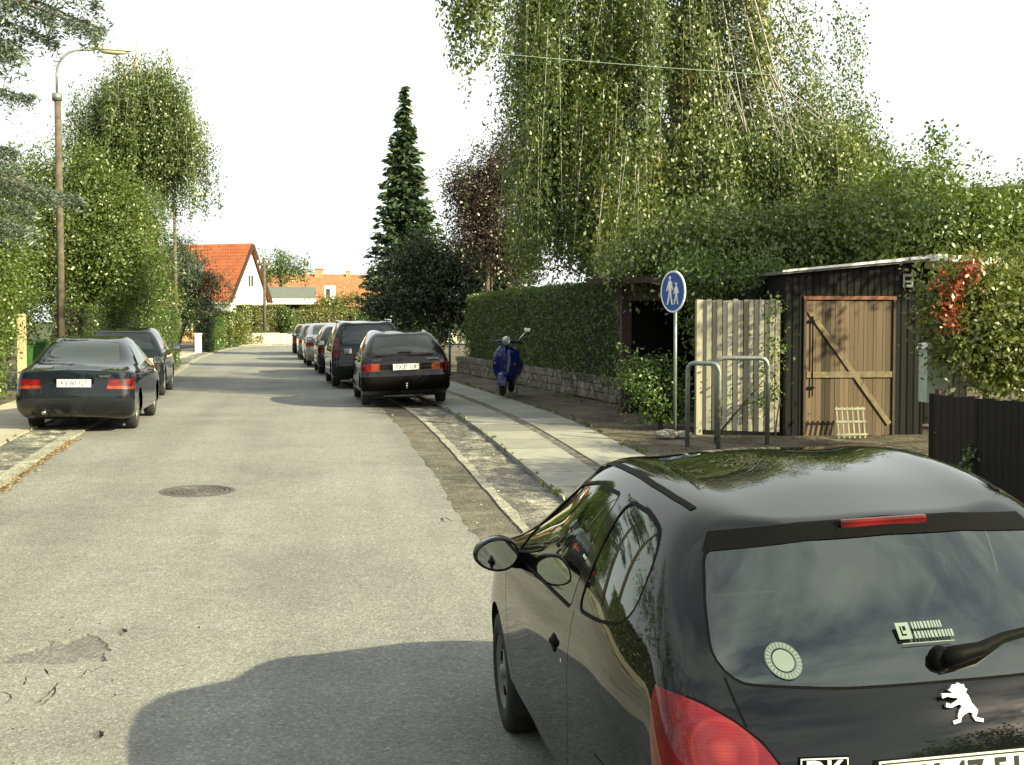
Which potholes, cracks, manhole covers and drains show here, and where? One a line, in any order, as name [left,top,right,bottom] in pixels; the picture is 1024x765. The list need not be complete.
crack [3,665,103,706]
pothole [0,633,111,665]
manhole cover [159,485,236,497]
